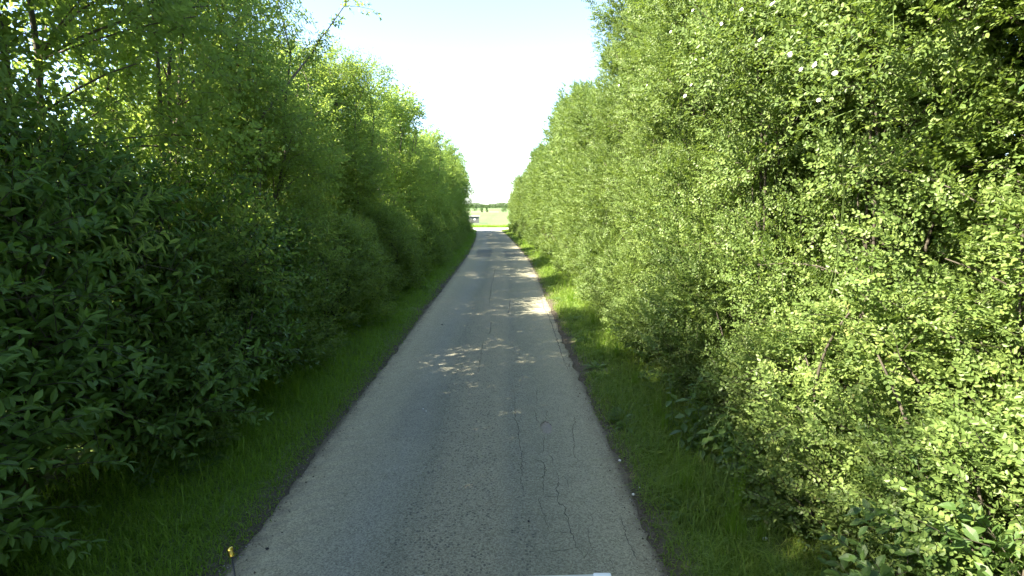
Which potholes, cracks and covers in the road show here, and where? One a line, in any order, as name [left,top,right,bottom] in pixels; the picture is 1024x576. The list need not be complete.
crack [537,417,637,569]
